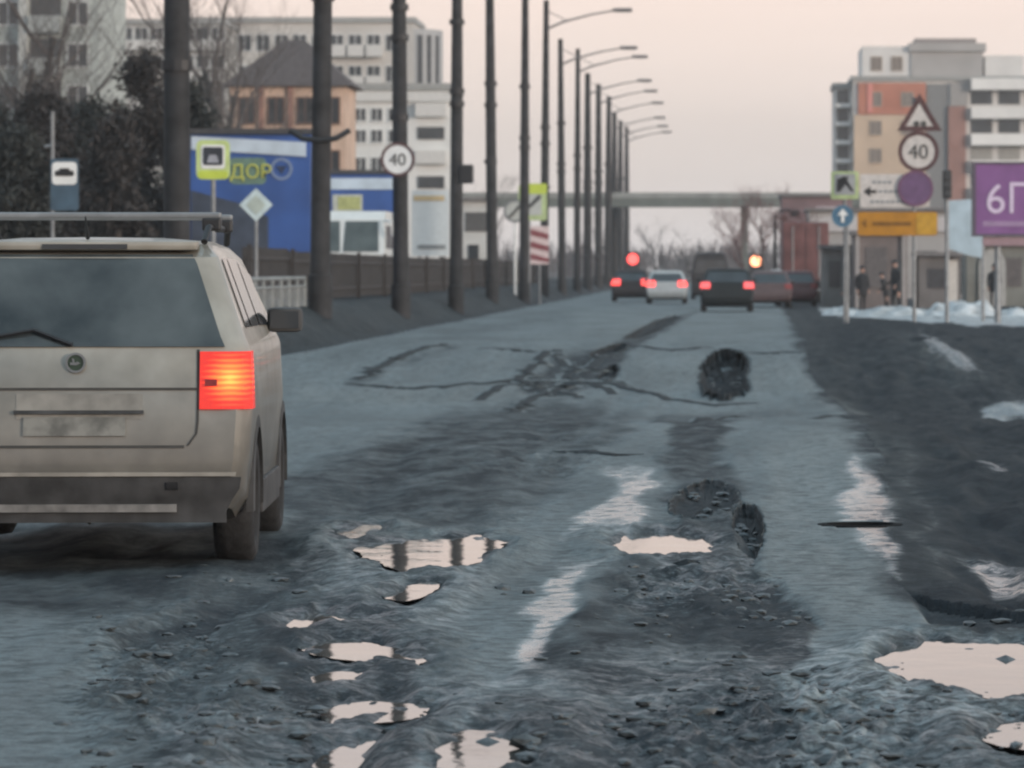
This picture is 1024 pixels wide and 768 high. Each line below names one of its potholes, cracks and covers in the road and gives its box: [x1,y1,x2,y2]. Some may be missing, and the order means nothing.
pothole [296,640,426,665]
pothole [874,641,1024,699]
pothole [353,535,508,572]
pothole [382,581,440,603]
pothole [613,533,715,555]
pothole [696,348,751,402]
pothole [320,701,429,723]
pothole [668,478,742,520]
crack [344,343,757,422]
pothole [435,730,532,768]
pothole [732,502,764,560]
pothole [979,722,1024,750]
